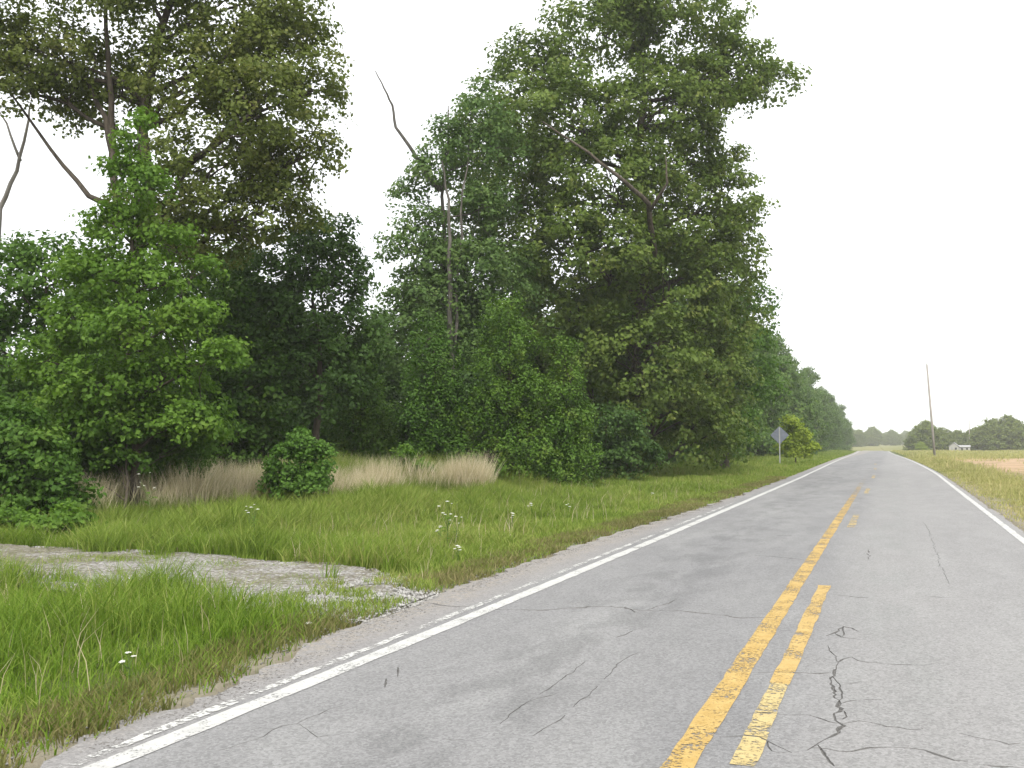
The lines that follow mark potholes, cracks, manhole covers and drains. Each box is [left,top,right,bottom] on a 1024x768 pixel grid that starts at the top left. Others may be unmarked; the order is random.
crack [495,600,761,618]
crack [725,626,1019,766]
crack [492,631,638,735]
crack [216,706,341,751]
